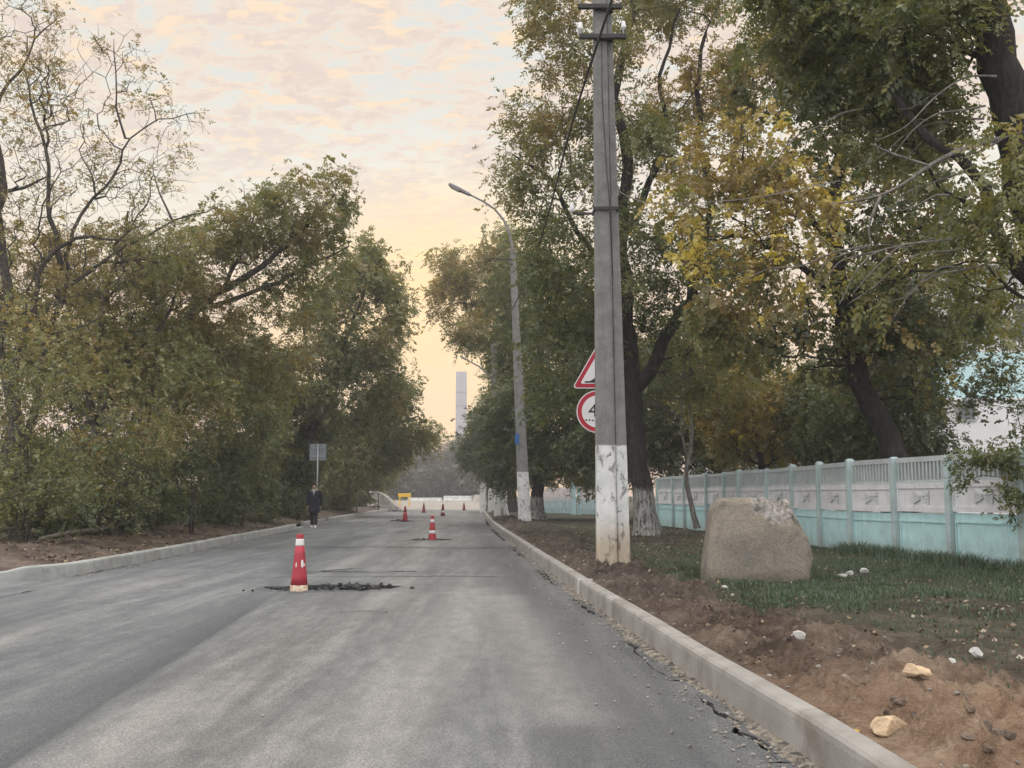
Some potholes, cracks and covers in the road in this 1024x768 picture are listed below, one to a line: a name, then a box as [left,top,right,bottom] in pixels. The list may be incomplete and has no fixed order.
pothole [255,582,409,593]
